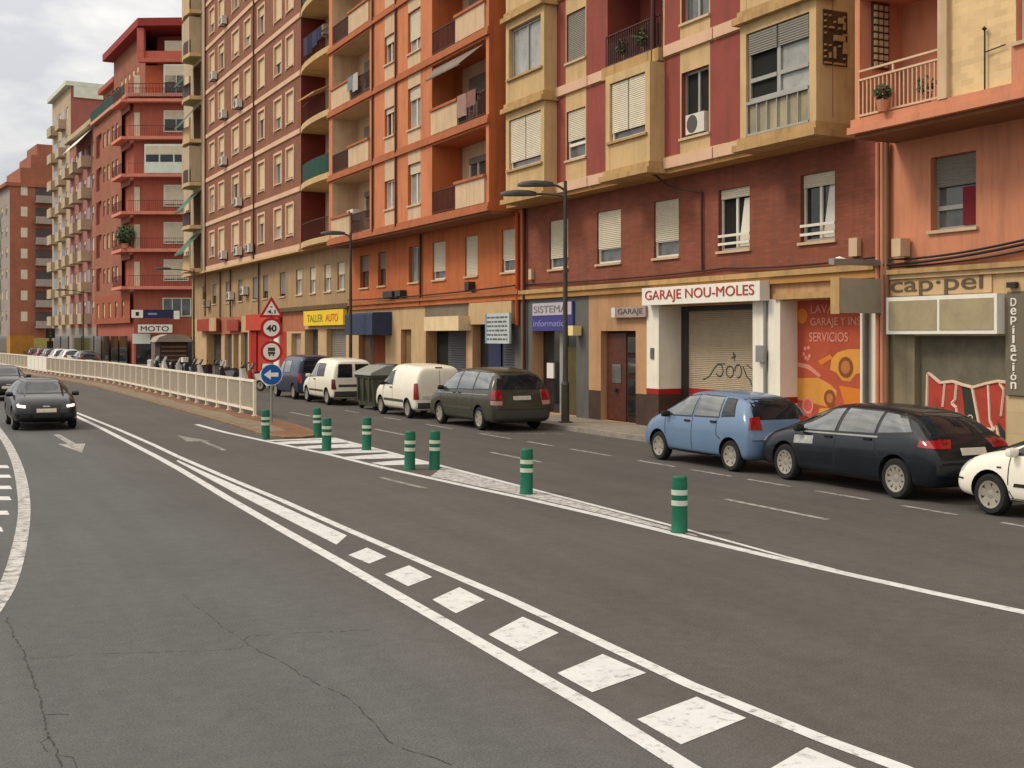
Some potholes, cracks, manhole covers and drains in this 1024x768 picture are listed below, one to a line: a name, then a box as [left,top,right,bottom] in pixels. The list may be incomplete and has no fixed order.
crack [6,594,455,768]
